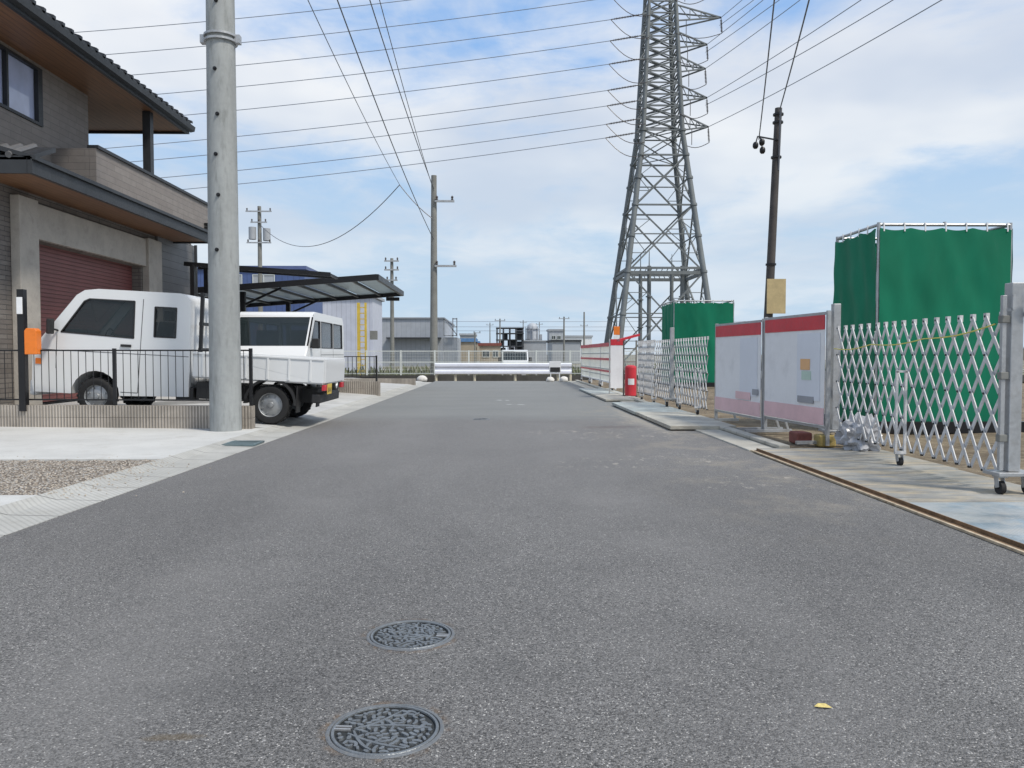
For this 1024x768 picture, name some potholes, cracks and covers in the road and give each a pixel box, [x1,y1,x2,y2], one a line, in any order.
manhole cover [325,704,444,759]
manhole cover [366,620,455,651]
